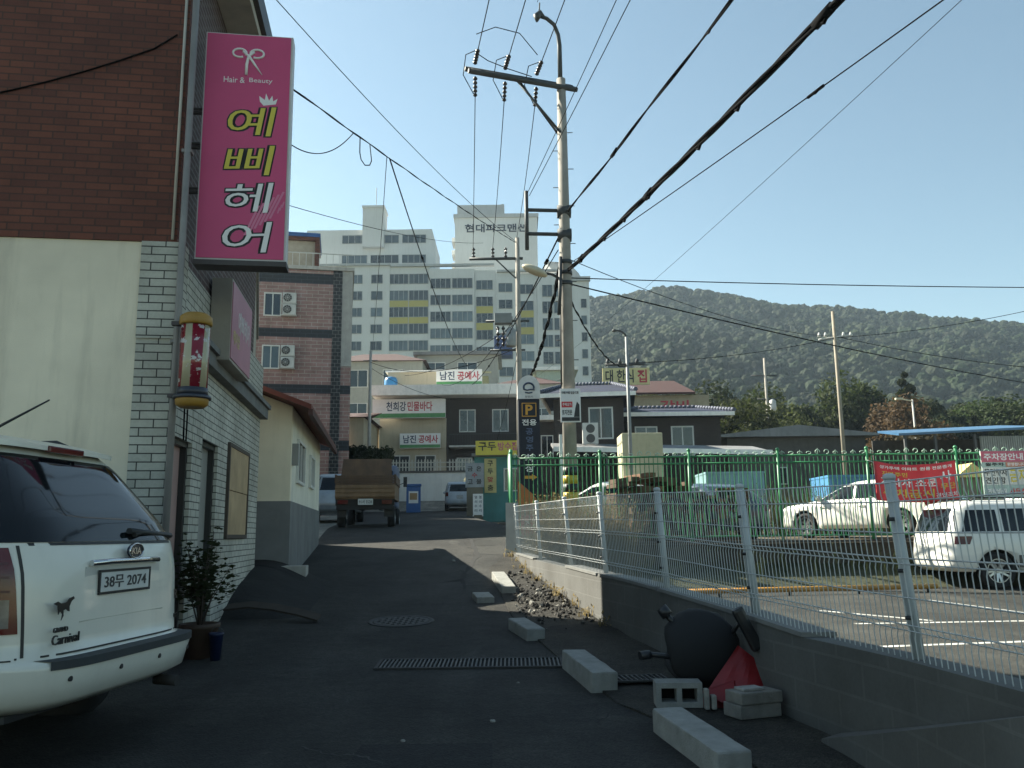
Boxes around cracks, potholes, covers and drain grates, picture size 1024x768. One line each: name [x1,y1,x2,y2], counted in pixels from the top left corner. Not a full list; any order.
drain grate [618,673,667,683]
drain grate [373,657,562,670]
manhole cover [367,615,434,627]
